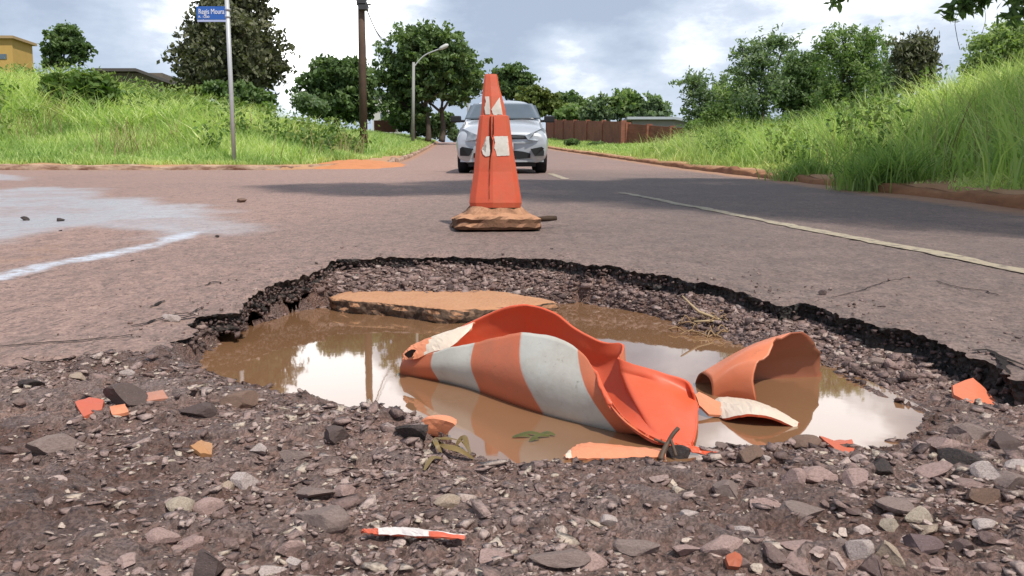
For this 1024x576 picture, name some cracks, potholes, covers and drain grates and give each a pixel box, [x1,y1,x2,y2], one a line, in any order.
pothole [0,256,1024,576]
